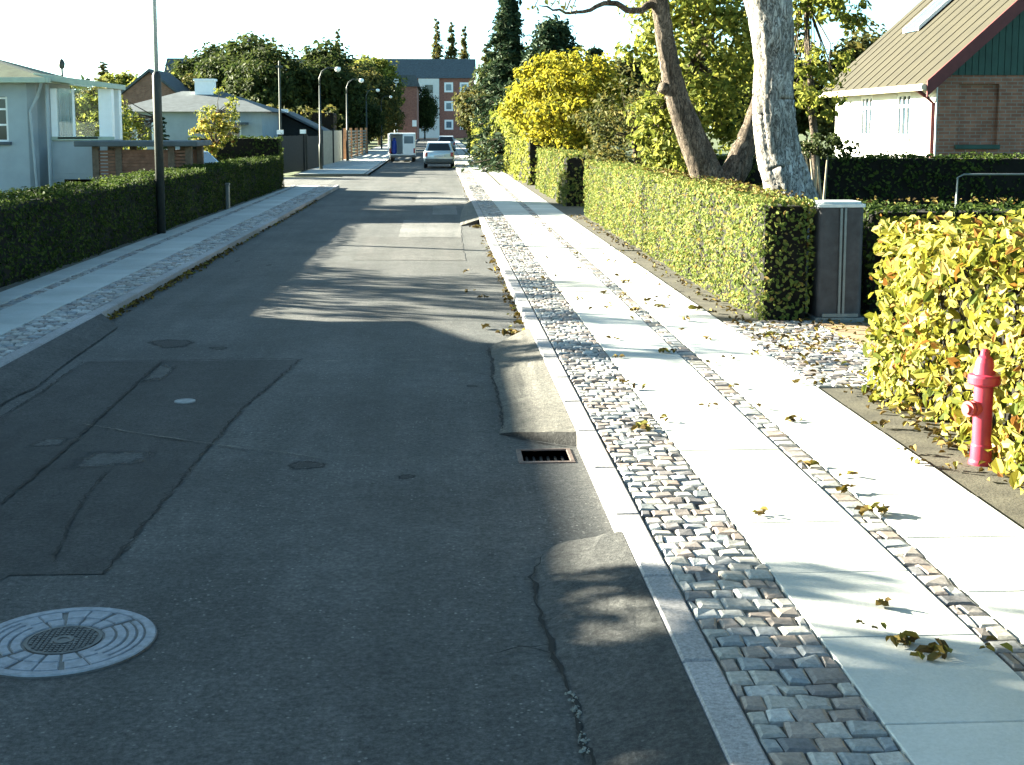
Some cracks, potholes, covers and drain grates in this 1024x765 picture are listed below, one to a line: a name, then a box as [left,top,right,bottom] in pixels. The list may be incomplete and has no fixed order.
crack [490,557,596,765]
manhole cover [0,607,158,679]
drain grate [516,448,576,464]
crack [0,358,319,561]
